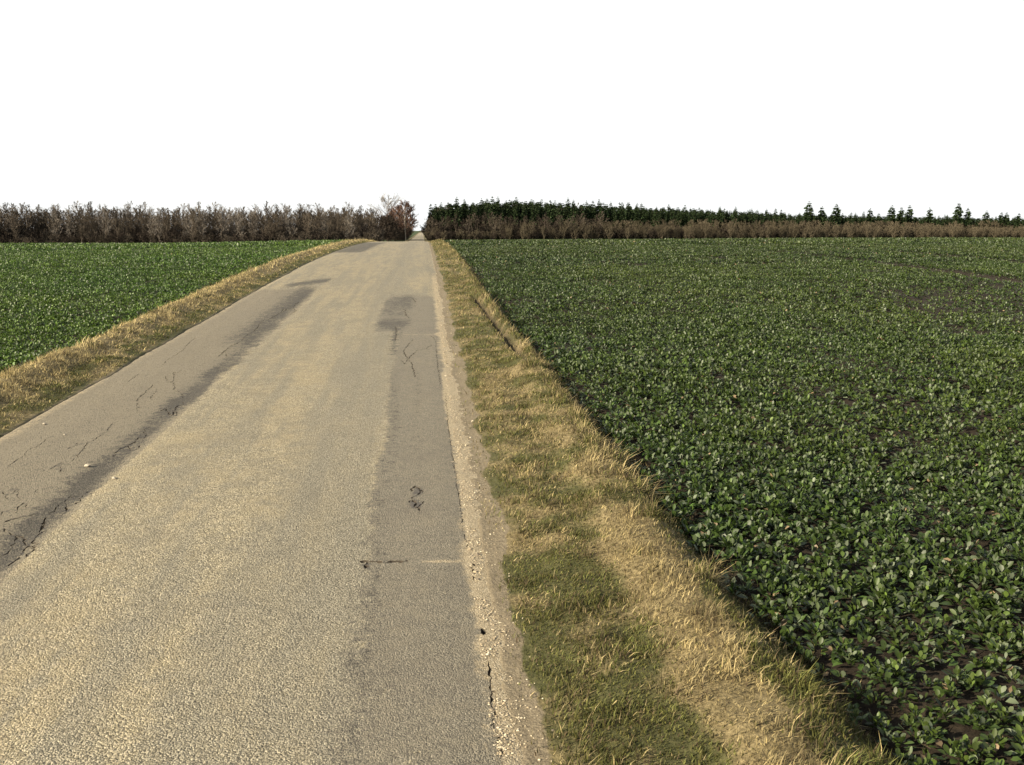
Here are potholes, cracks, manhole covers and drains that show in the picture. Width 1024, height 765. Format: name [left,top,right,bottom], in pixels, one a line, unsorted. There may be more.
crack [394,299,476,580]
crack [485,648,503,764]
crack [128,339,193,416]
crack [51,423,147,472]
crack [1,489,92,566]
